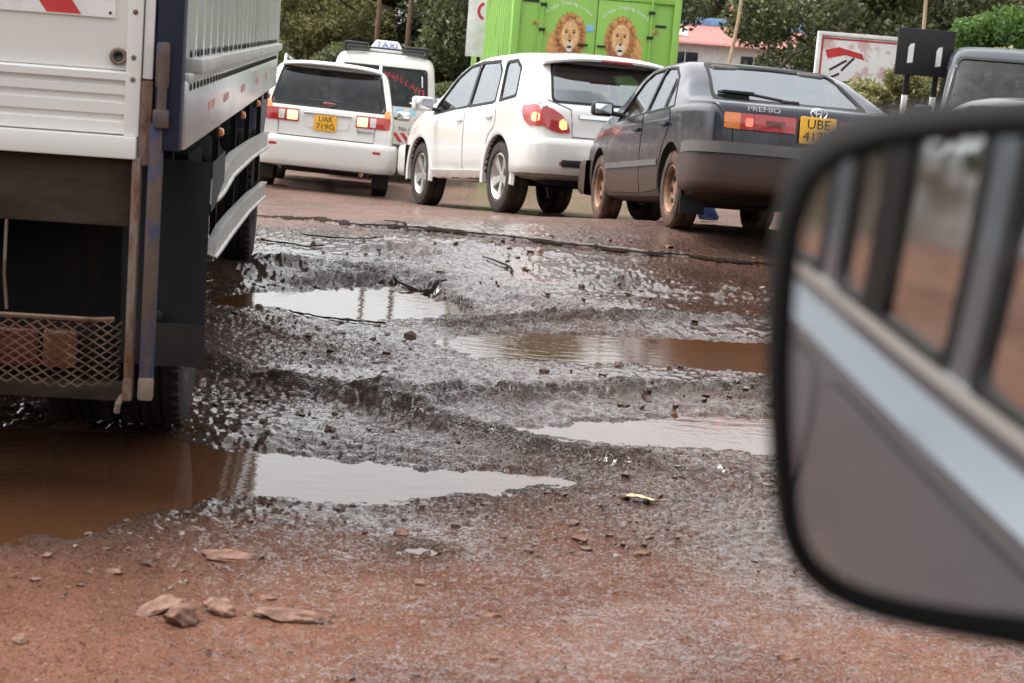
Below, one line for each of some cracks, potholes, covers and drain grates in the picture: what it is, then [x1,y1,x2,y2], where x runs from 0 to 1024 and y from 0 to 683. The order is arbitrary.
pothole [275,269,402,291]
pothole [405,279,477,310]
crack [256,215,769,324]
pothole [423,328,765,374]
pothole [350,241,447,259]
pothole [610,272,640,290]
pothole [205,284,480,324]
pothole [0,417,586,546]
pothole [512,410,769,455]
